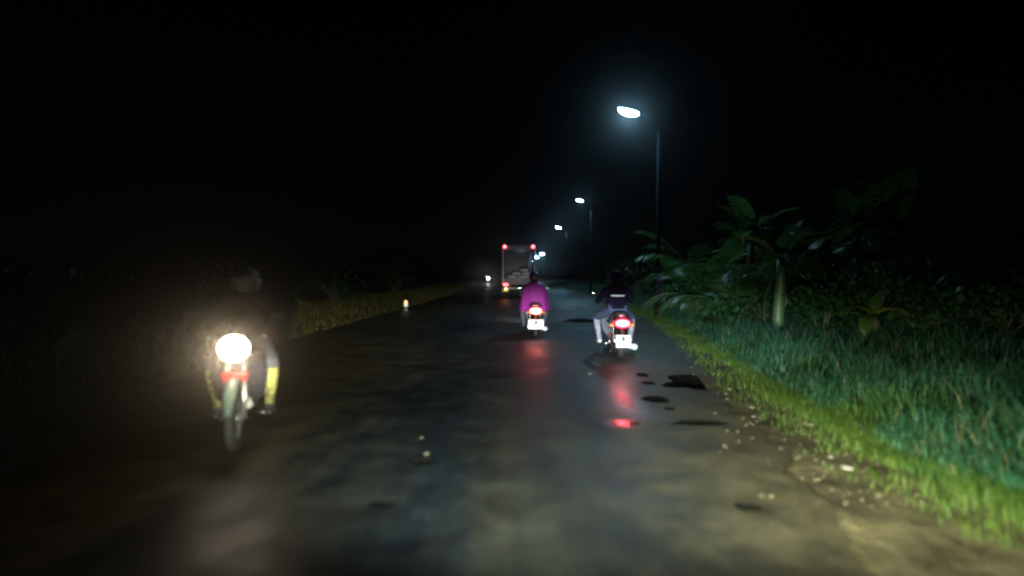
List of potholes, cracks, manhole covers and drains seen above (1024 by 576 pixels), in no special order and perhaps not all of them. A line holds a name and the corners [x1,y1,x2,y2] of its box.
pothole [732,502,763,511]
pothole [662,374,737,392]
